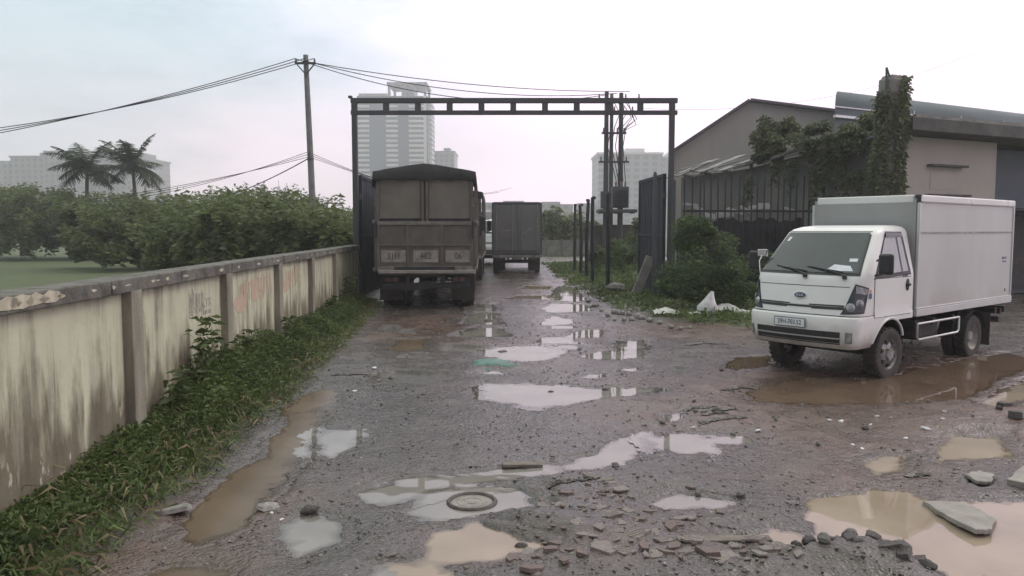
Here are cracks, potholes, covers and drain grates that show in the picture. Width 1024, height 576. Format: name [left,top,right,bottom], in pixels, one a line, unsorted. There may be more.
pothole [348,558,467,576]
pothole [472,345,569,362]
manhole cover [446,492,497,511]
pothole [557,429,653,472]
pothole [391,480,553,529]
pothole [384,516,563,576]
pothole [738,351,1024,406]
pothole [236,410,331,476]
pothole [158,455,301,550]
pothole [473,381,661,410]
pothole [633,487,749,512]
